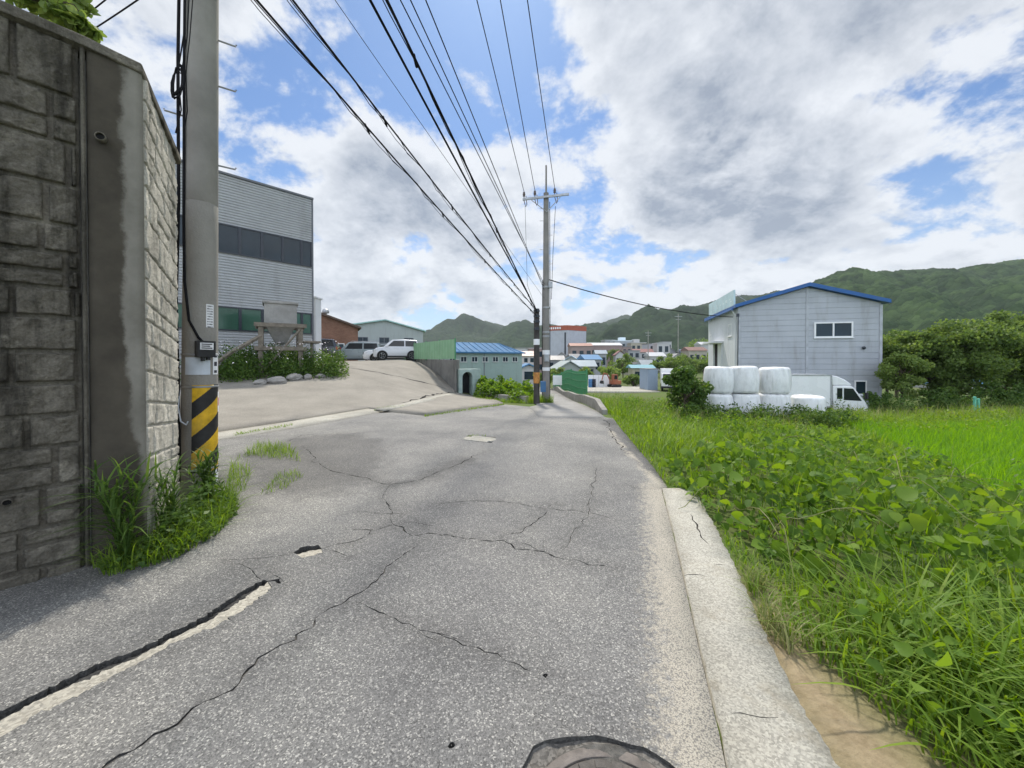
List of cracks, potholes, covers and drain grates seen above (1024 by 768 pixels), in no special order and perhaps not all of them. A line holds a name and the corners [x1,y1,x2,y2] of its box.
manhole cover [546,747,656,768]
crack [102,472,614,768]
pothole [294,545,323,558]
